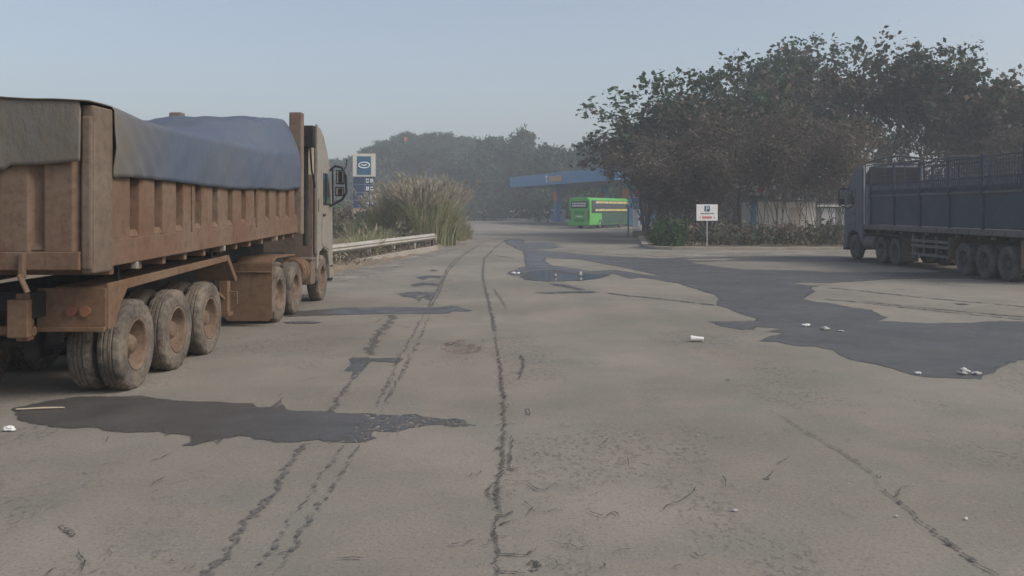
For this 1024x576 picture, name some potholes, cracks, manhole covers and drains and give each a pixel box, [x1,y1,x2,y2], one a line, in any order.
crack [782,416,998,575]
crack [446,333,554,576]
